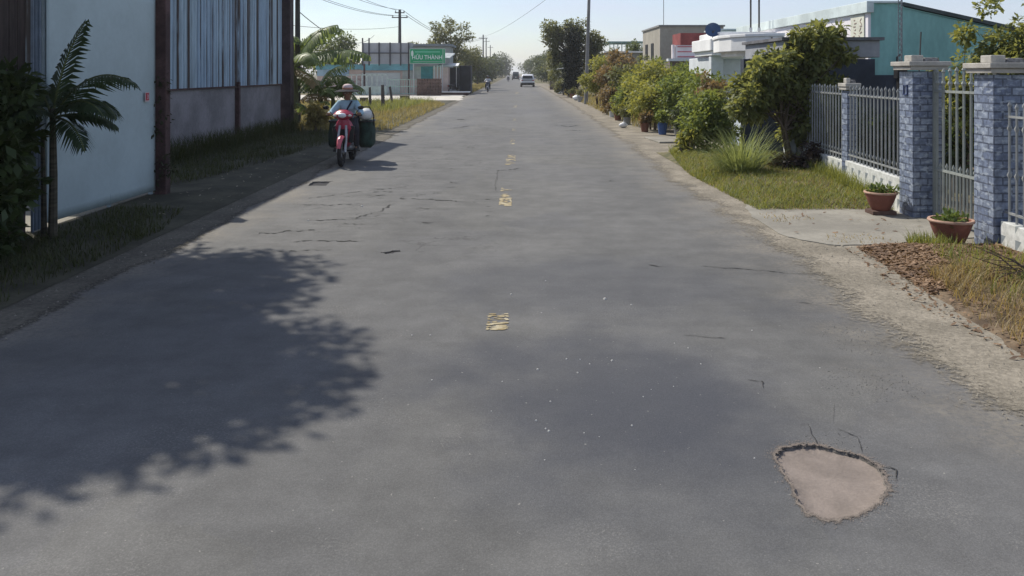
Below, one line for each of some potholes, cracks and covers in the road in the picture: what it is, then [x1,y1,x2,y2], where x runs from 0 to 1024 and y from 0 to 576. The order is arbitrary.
crack [256,188,462,252]
pothole [774,442,888,519]
